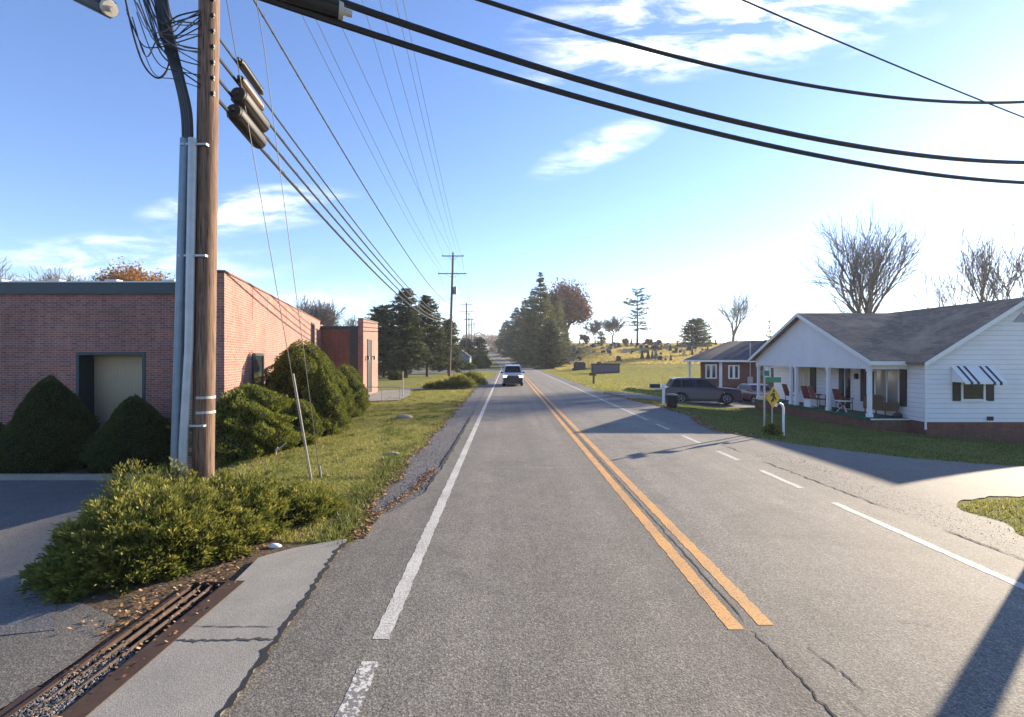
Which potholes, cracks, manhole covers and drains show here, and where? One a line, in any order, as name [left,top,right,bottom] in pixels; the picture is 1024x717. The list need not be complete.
crack [764,461,890,509]
crack [807,646,867,717]
drain grate [0,580,245,717]
crack [942,528,1022,559]
